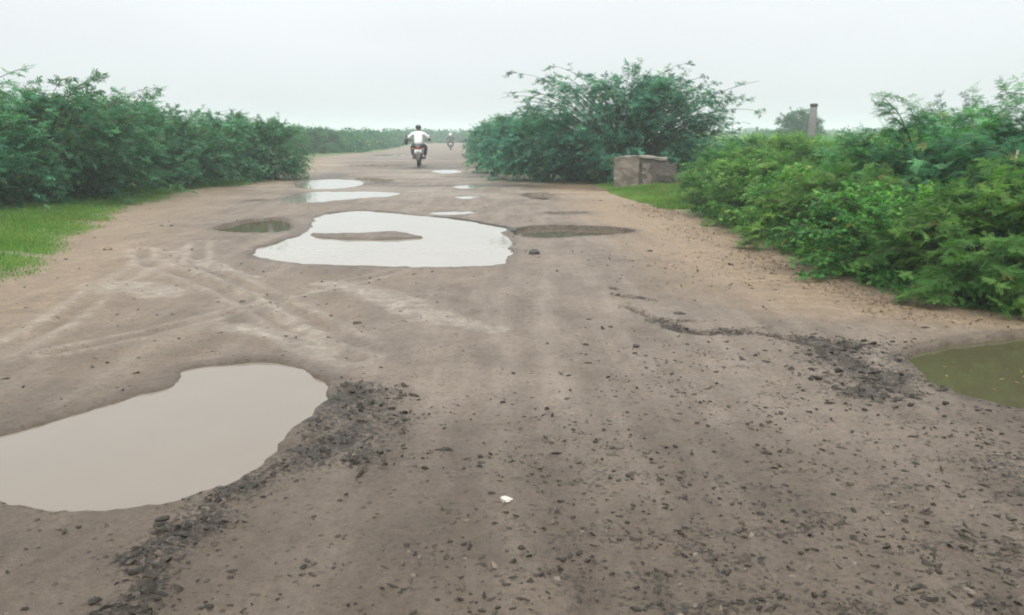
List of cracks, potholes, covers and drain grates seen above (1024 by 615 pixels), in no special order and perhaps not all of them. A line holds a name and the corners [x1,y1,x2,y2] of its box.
pothole [902,332,1024,409]
pothole [511,224,635,238]
pothole [279,191,402,203]
pothole [247,210,516,268]
pothole [211,217,296,233]
pothole [0,356,337,514]
crack [613,293,868,357]
pothole [291,179,366,189]
